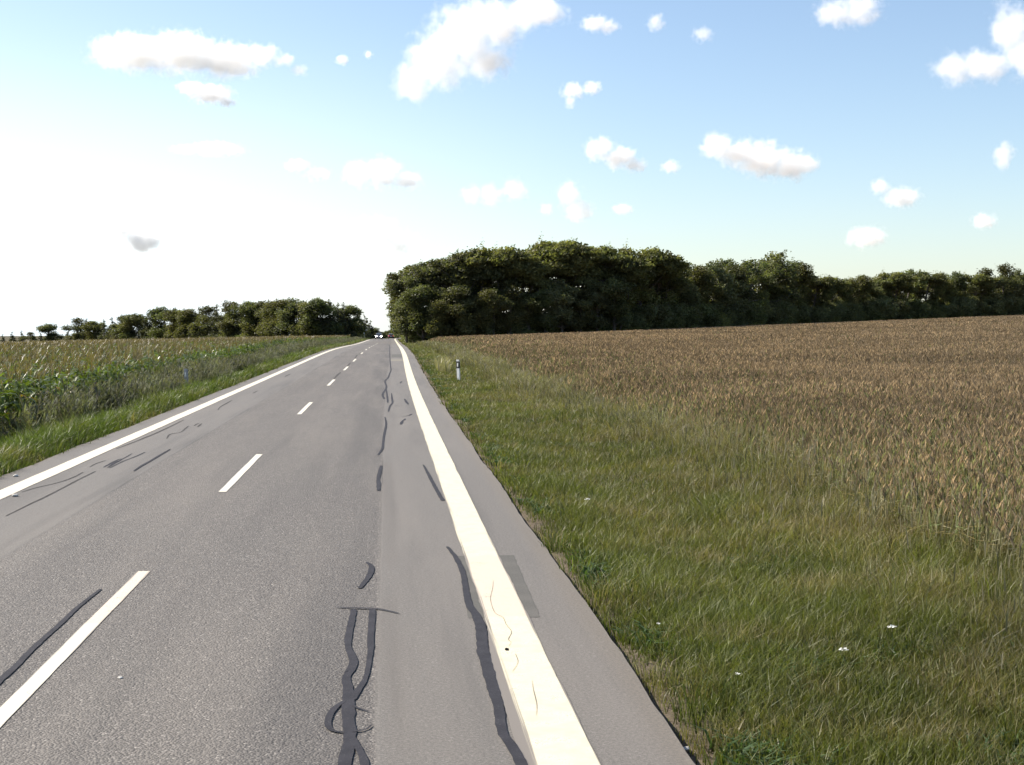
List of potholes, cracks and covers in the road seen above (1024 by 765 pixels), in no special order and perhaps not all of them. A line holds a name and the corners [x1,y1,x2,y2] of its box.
crack [490,587,537,713]
